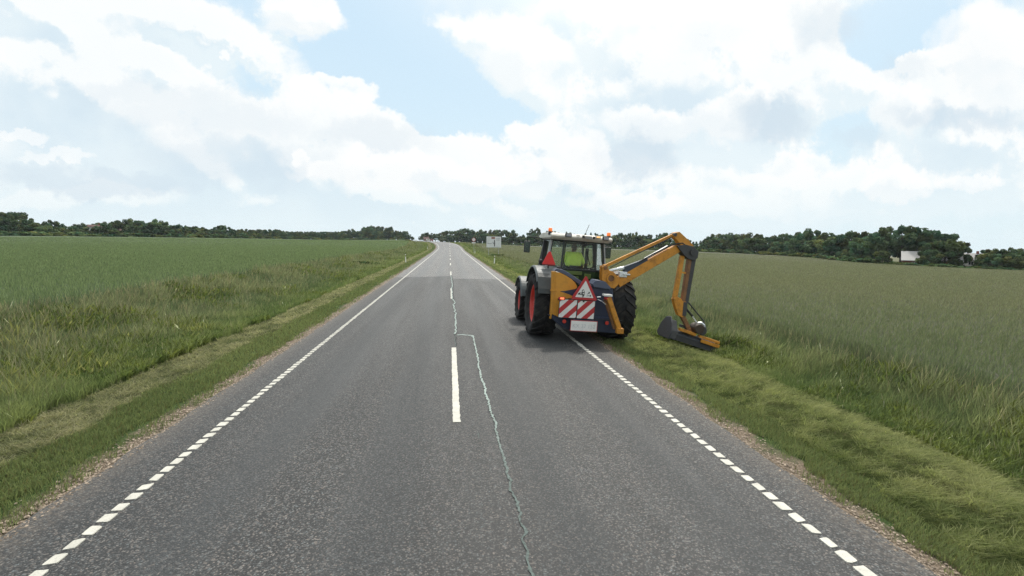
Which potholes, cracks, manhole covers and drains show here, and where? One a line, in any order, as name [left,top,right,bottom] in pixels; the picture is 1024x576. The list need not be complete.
crack [451,275,535,576]
